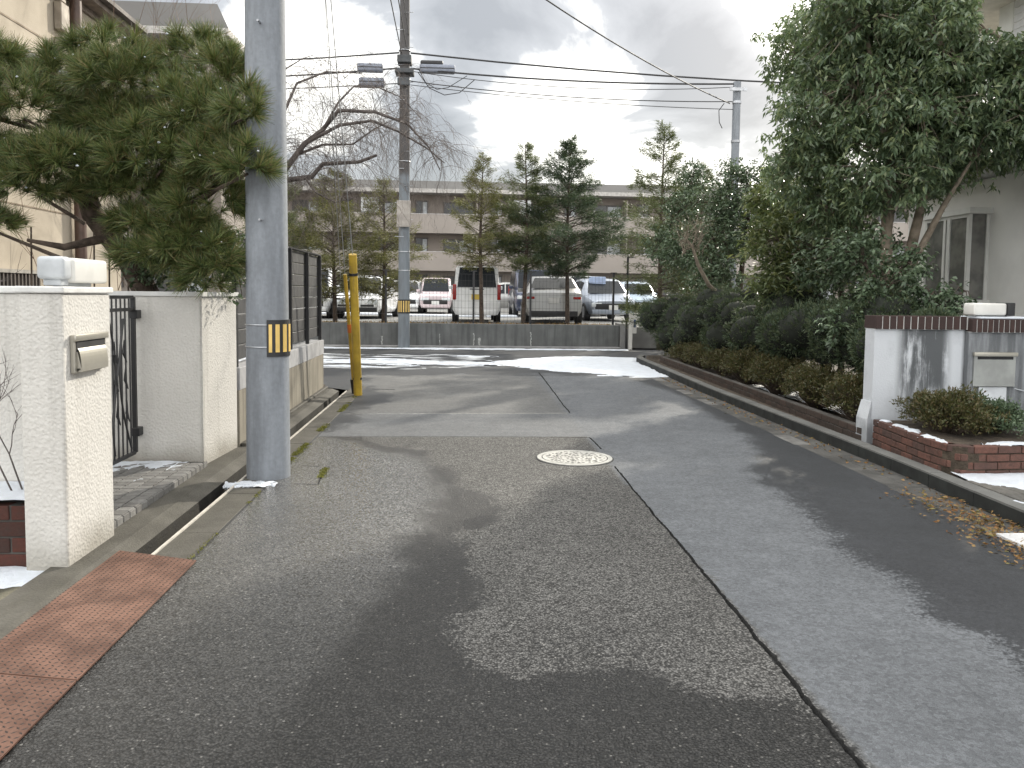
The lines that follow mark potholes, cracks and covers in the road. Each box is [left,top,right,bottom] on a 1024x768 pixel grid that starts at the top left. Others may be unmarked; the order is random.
manhole cover [536,450,614,466]
